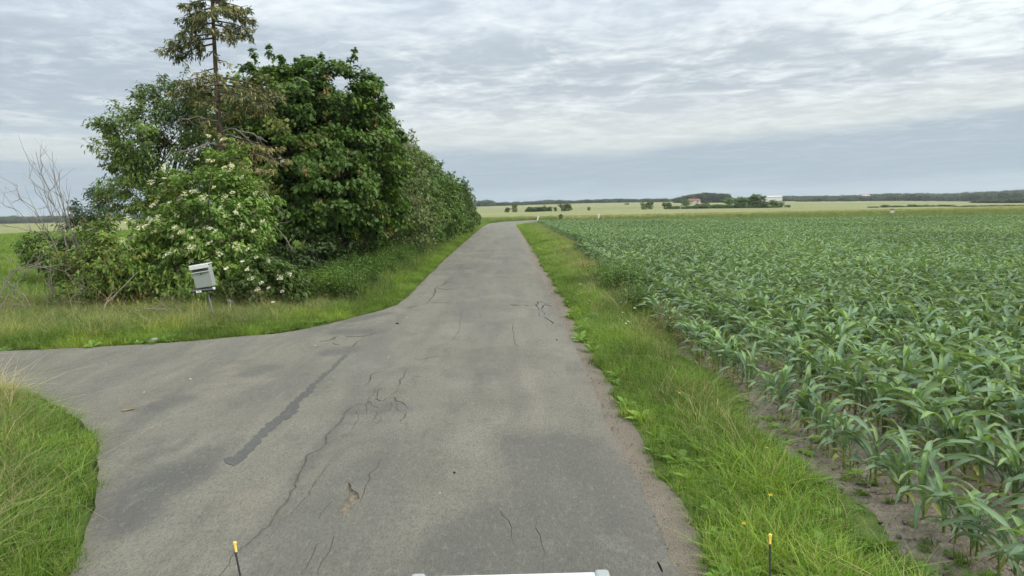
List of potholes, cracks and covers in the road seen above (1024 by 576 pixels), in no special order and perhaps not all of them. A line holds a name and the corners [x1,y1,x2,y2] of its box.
crack [403,265,462,309]
pothole [338,483,360,517]
crack [218,356,437,576]
crack [510,302,552,346]
